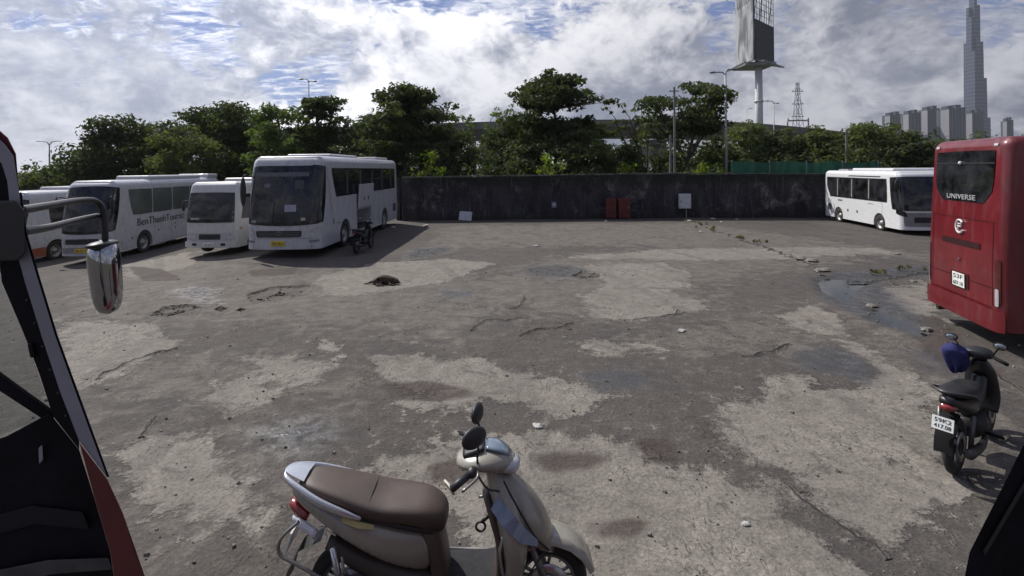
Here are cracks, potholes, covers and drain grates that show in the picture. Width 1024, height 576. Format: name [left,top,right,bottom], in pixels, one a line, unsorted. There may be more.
crack [742,343,793,358]
crack [779,481,893,561]
pothole [141,303,210,321]
crack [469,295,575,337]
crack [624,309,687,321]
crack [137,415,161,438]
pothole [566,270,607,281]
pothole [239,284,316,305]
crack [94,347,178,380]
pothole [206,305,235,315]
